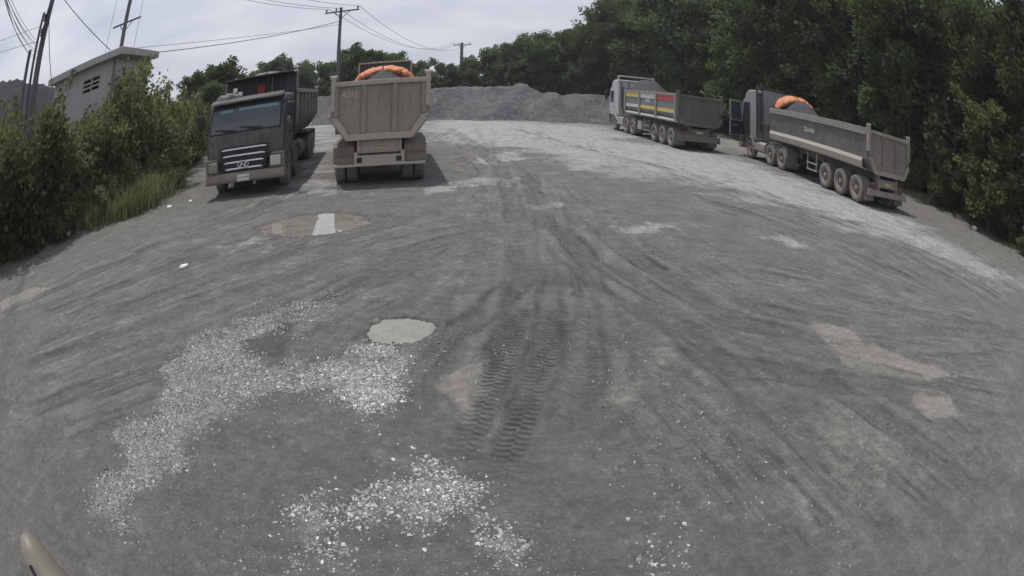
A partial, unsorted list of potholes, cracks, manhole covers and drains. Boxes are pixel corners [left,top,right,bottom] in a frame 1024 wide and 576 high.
pothole [356,313,447,347]
pothole [242,209,390,241]
